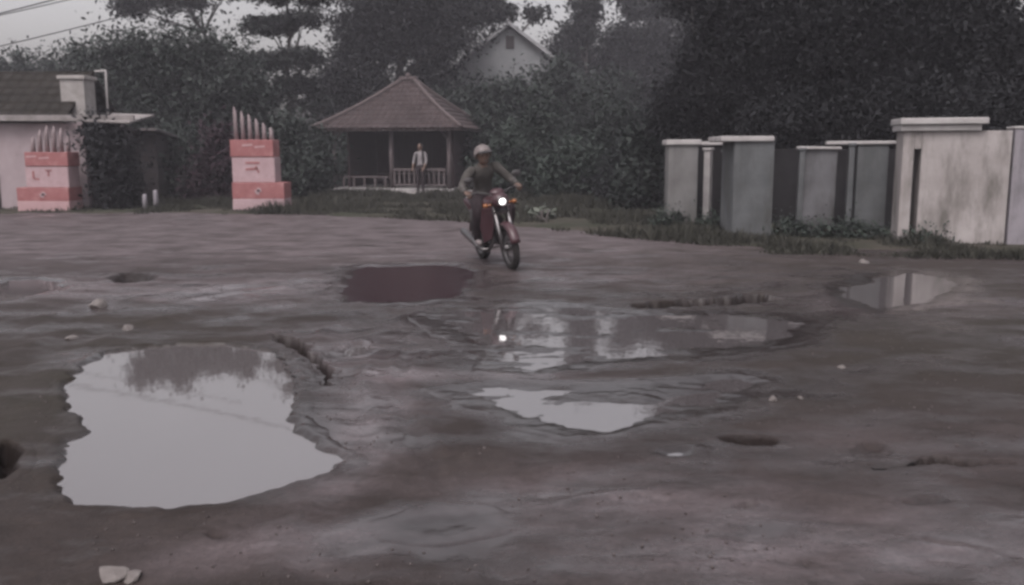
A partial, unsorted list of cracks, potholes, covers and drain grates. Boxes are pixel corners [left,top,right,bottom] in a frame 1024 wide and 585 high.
pothole [704,430,797,452]
pothole [0,435,37,485]
pothole [808,268,989,316]
crack [254,332,343,393]
pothole [30,340,369,518]
pothole [406,301,834,378]
pothole [322,262,491,305]
pothole [420,371,780,443]
pothole [96,271,170,286]
